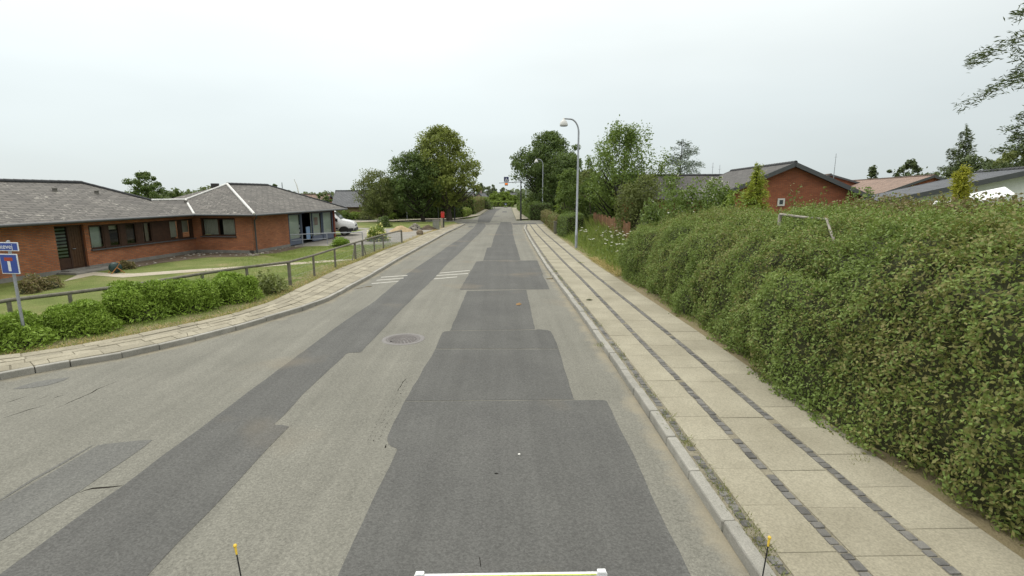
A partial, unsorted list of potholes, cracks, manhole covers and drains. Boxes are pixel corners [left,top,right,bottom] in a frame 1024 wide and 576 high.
manhole cover [382,333,425,345]
